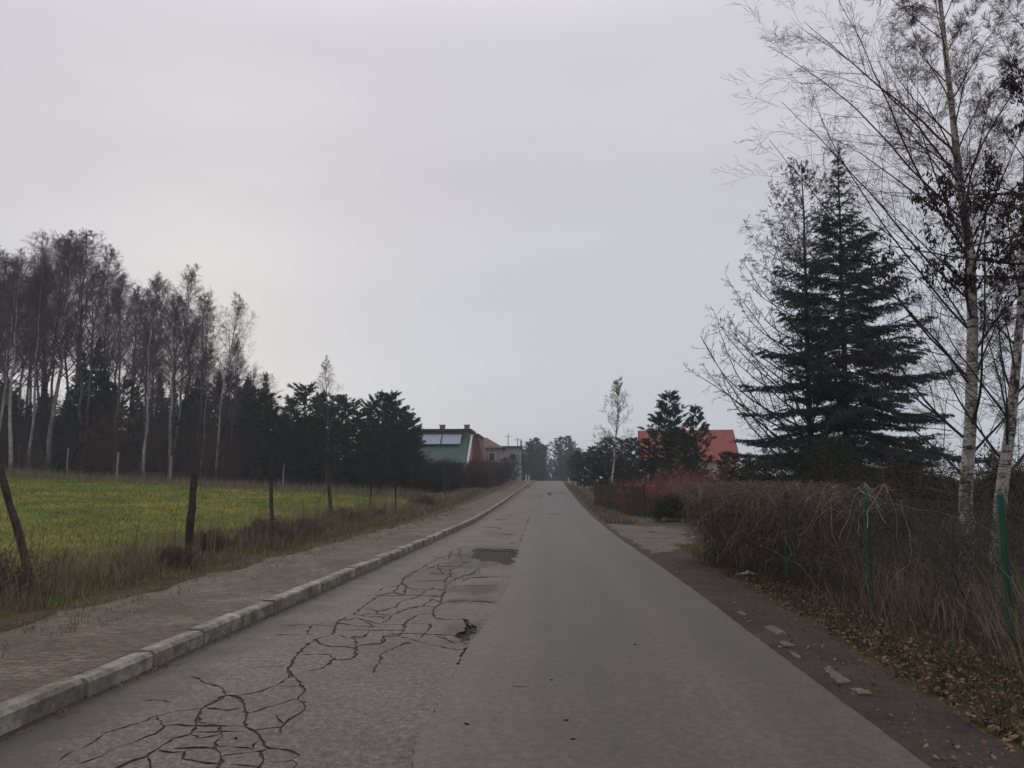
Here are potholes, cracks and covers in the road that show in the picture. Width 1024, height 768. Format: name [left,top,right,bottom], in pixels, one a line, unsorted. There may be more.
pothole [455,619,477,642]
crack [60,546,499,768]
